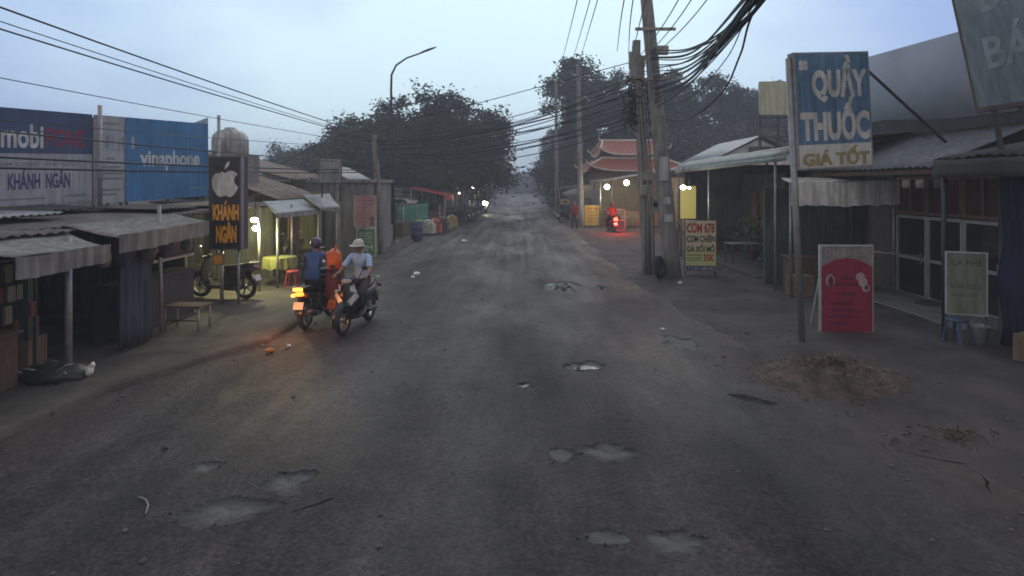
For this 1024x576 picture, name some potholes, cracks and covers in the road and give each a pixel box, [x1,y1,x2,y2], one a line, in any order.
pothole [546,446,575,462]
pothole [570,440,645,463]
pothole [540,281,583,293]
pothole [662,334,700,352]
pothole [576,526,634,546]
pothole [727,393,778,406]
pothole [562,360,605,372]
pothole [168,496,287,532]
pothole [188,460,228,473]
pothole [633,526,716,560]
pothole [251,468,322,496]
crack [294,497,337,512]
